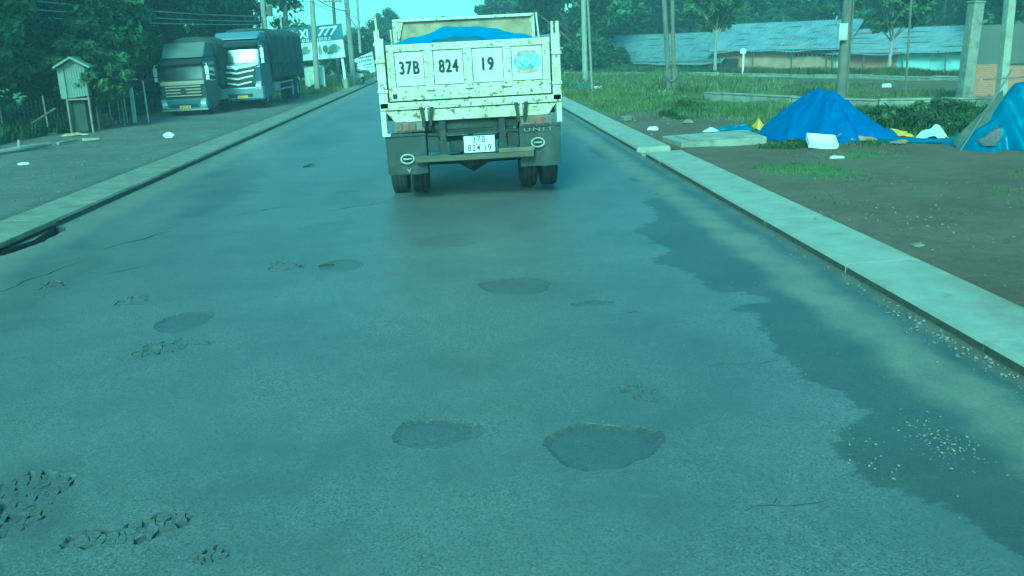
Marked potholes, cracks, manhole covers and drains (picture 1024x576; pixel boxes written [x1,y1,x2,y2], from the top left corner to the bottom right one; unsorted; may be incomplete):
crack [0,261,81,292]
pothole [318,259,364,272]
pothole [391,419,486,449]
pothole [542,422,666,472]
crack [616,384,662,402]
pothole [477,277,552,295]
pothole [153,311,216,334]
crack [132,339,216,358]
crack [0,469,232,565]
crack [114,294,151,306]
crack [741,497,837,512]
